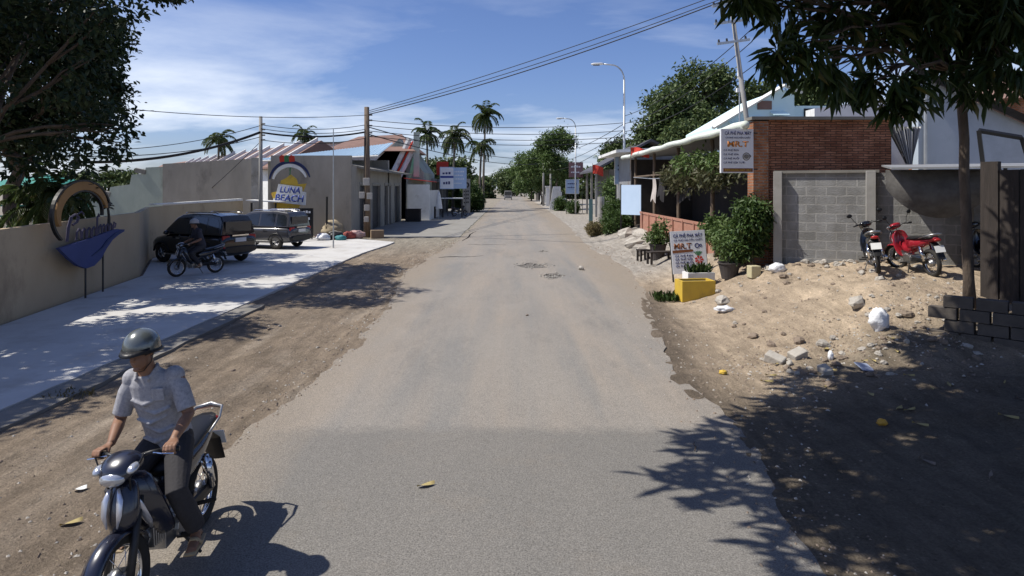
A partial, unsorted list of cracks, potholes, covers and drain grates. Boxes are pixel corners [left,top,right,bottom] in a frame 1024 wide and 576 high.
pothole [514,262,555,270]
